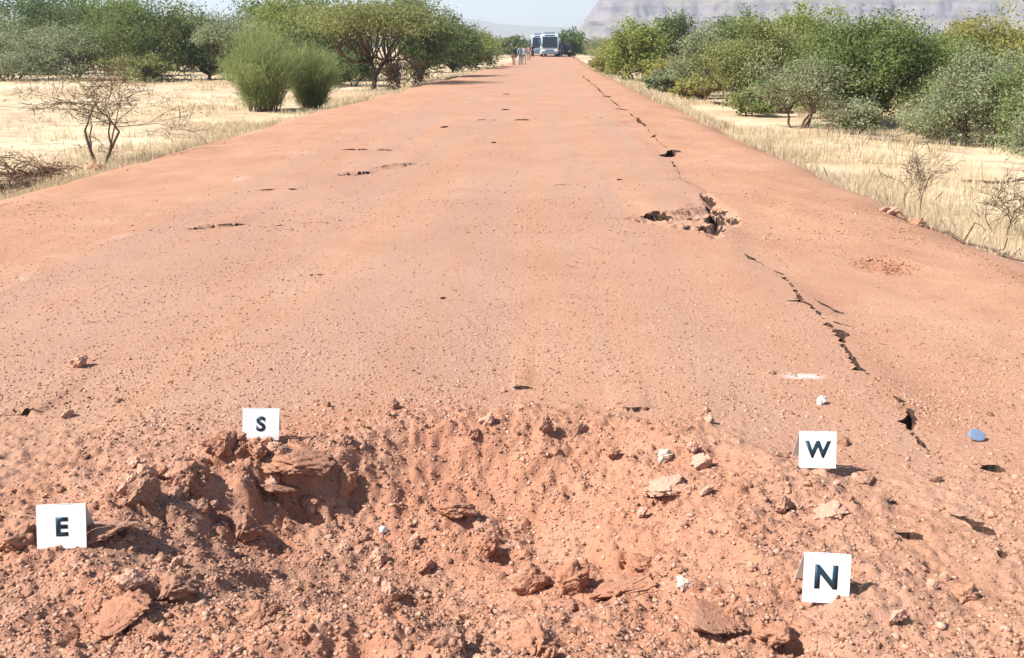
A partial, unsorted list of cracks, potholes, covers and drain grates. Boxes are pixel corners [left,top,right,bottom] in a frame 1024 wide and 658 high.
crack [582,75,707,193]
pothole [92,415,836,658]
crack [744,253,931,452]
pothole [624,193,742,239]
pothole [848,256,930,276]
